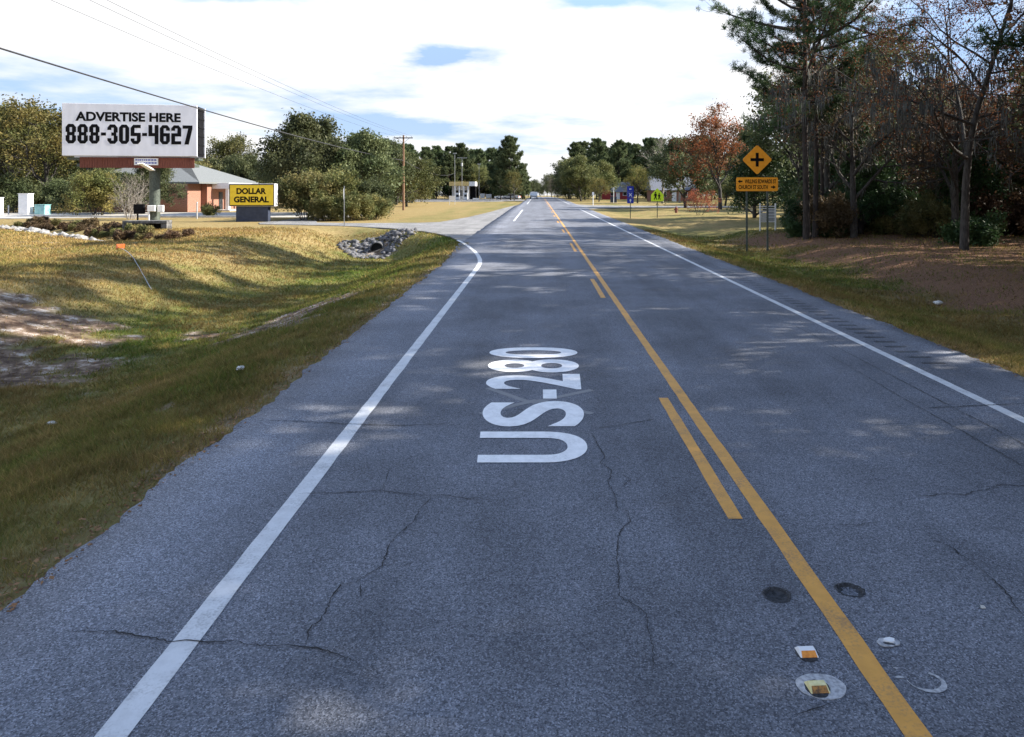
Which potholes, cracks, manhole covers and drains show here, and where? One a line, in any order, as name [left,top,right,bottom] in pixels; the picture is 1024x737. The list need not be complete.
crack [588,418,660,666]
crack [920,484,1024,496]
crack [329,472,481,499]
crack [932,539,1024,612]
crack [65,500,429,660]
